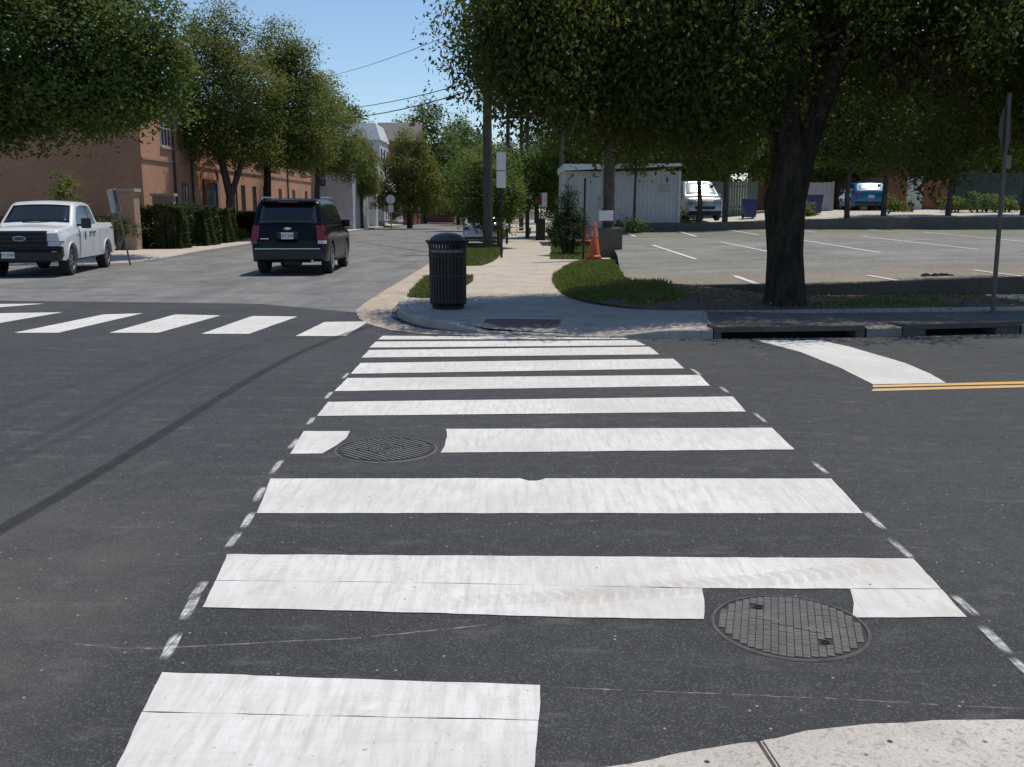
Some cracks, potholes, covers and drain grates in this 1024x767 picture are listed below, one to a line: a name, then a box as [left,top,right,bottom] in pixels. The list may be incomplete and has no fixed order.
drain grate [707,322,865,339]
drain grate [889,319,1021,336]
manhole cover [711,595,872,662]
manhole cover [334,437,438,463]
